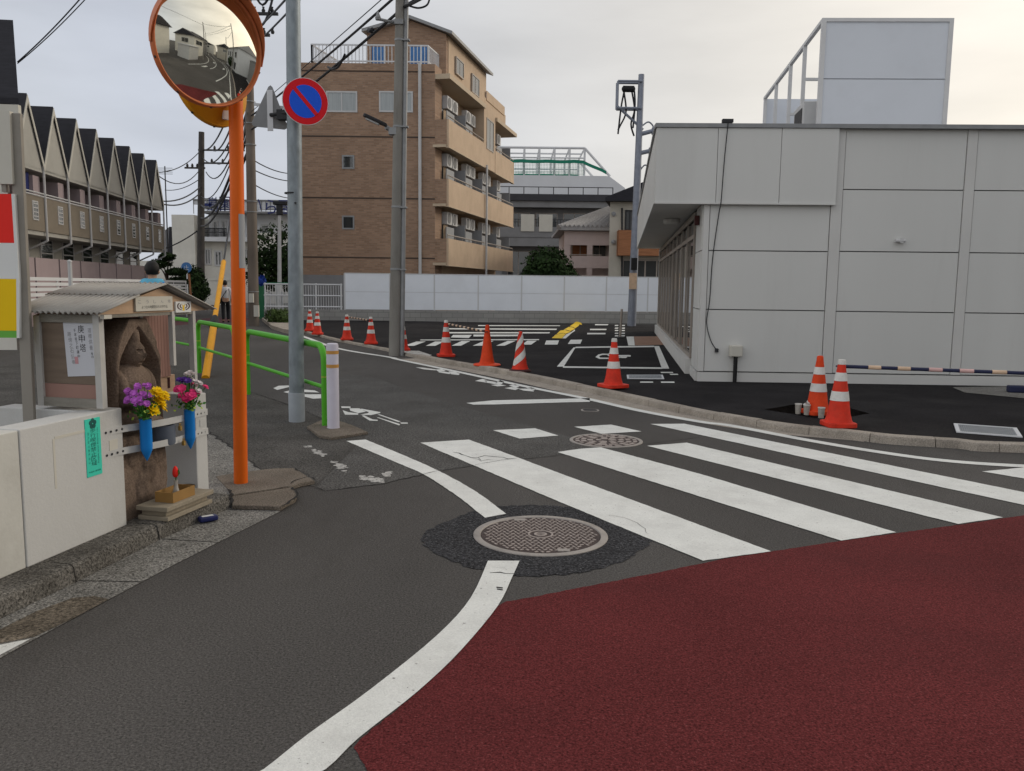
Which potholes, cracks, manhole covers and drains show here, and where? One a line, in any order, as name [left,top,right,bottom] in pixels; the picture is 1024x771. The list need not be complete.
manhole cover [473,515,608,557]
manhole cover [569,434,643,448]
drain grate [954,423,1023,438]
